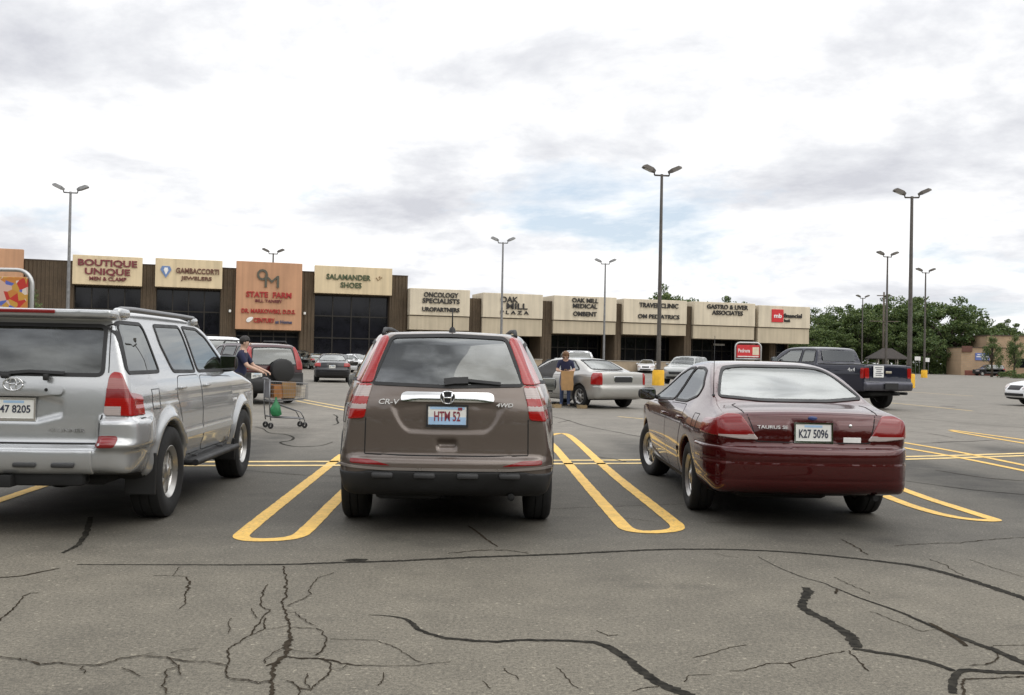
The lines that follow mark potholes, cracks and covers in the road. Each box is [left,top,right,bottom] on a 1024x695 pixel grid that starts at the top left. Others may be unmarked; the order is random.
crack [744,556,1024,671]
crack [469,526,498,547]
crack [0,566,442,695]
